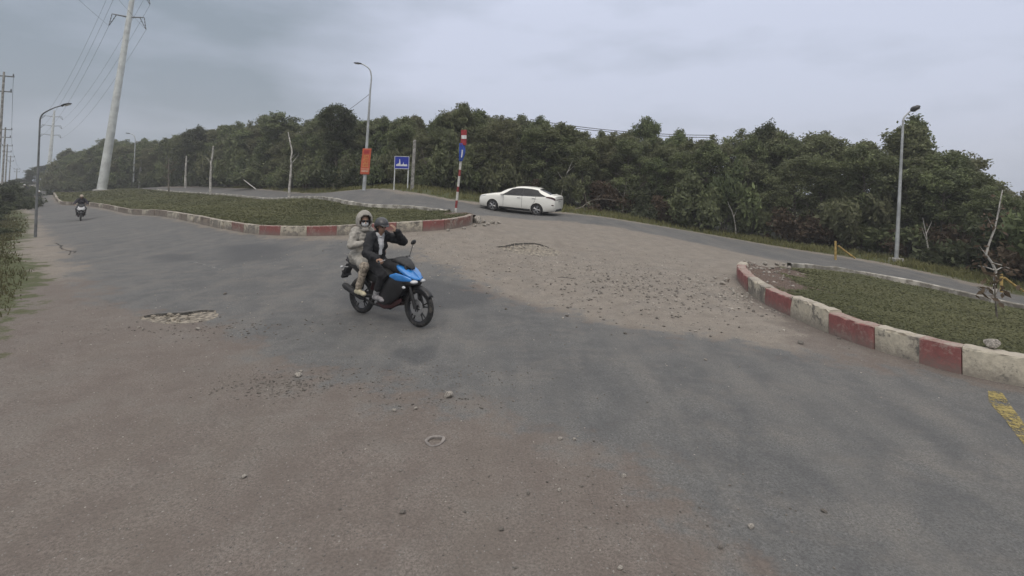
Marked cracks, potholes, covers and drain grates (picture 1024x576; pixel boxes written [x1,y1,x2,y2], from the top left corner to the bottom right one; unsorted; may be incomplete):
pothole [492,242,565,257]
pothole [130,308,228,326]
